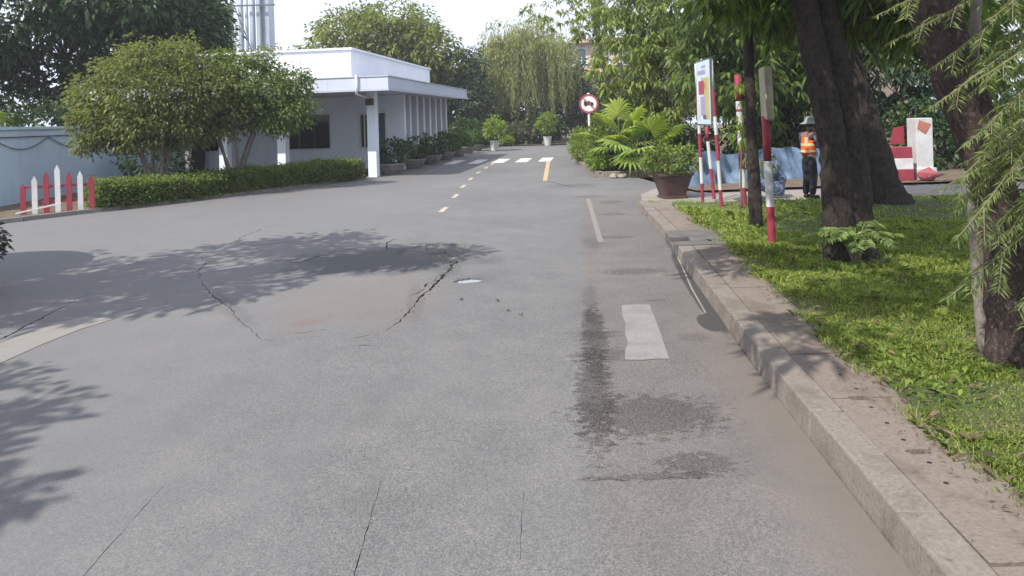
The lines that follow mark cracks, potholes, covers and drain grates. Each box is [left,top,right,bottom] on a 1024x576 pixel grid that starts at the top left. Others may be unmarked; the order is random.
crack [354,482,381,576]
crack [198,224,464,340]
crack [84,494,156,575]
